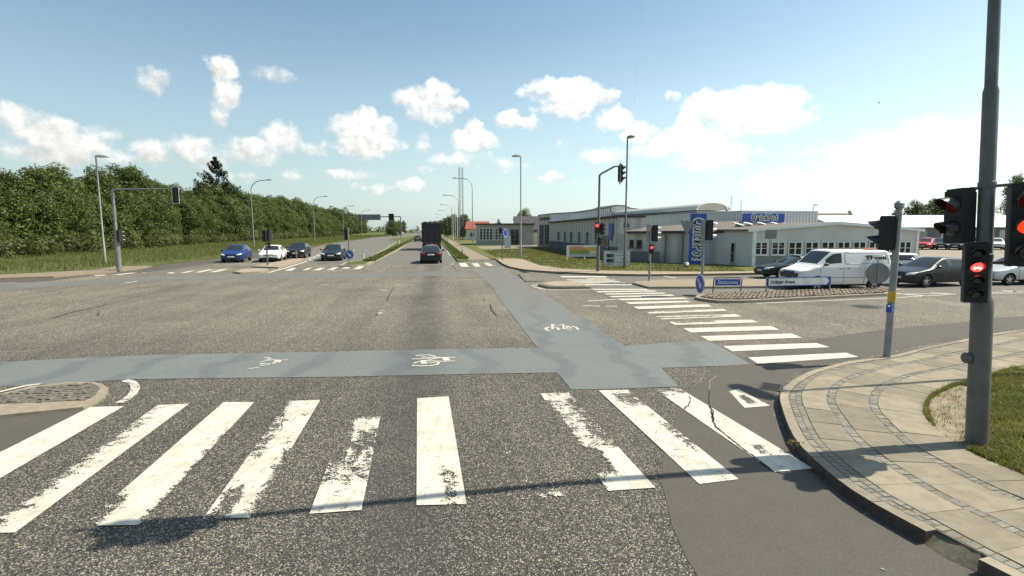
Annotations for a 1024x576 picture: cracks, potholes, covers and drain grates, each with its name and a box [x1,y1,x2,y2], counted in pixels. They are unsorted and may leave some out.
drain grate [759,382,783,392]
crack [708,390,773,471]
